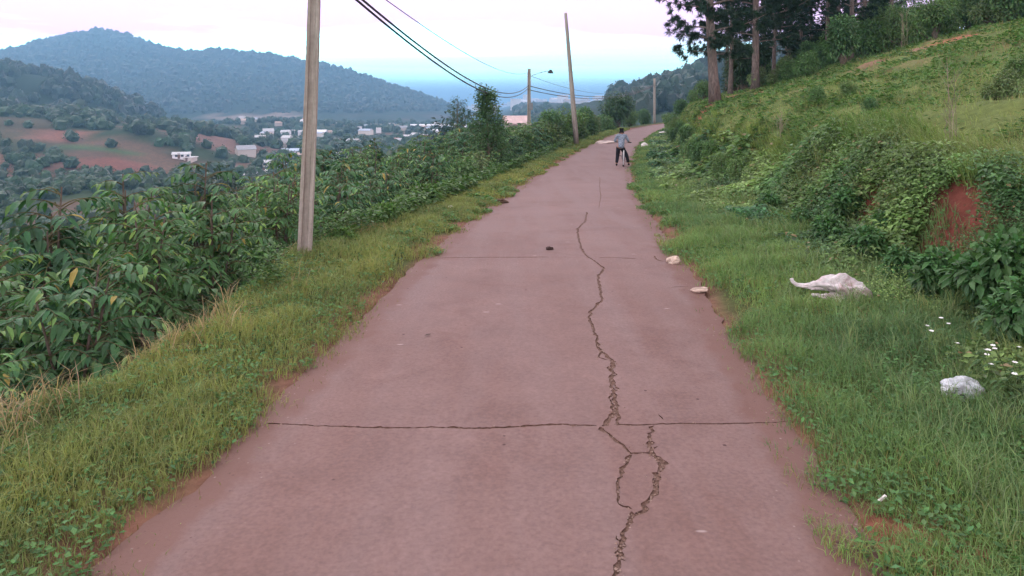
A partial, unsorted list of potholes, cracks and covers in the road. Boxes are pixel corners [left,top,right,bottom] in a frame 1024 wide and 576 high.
crack [270,182,775,576]
